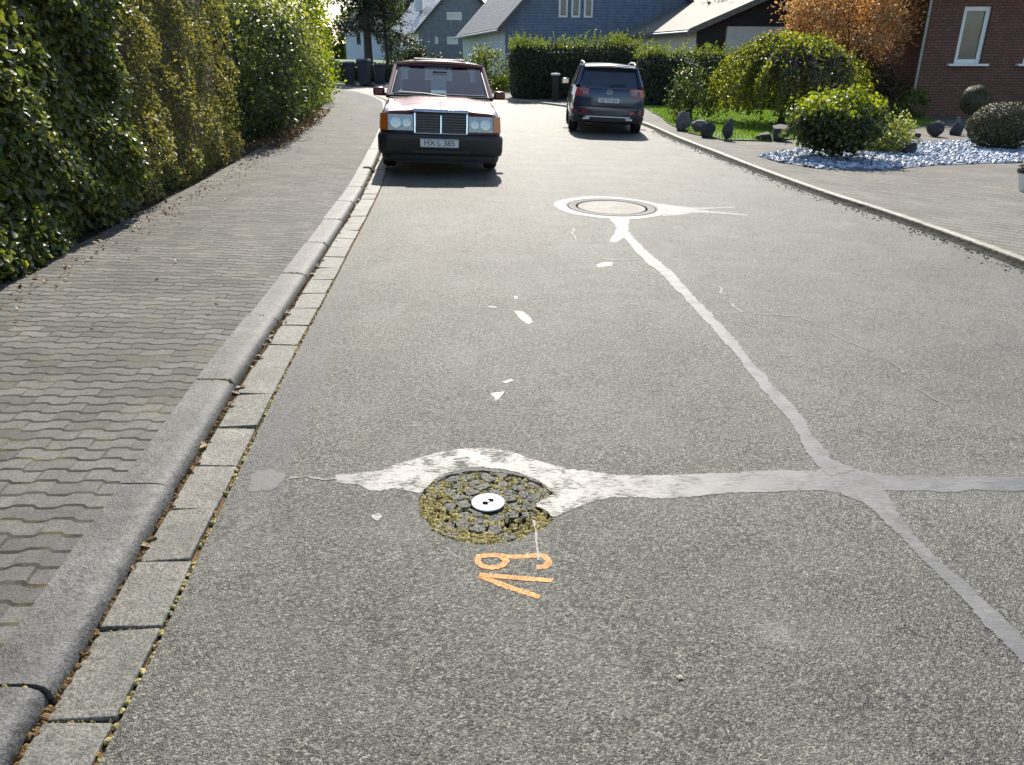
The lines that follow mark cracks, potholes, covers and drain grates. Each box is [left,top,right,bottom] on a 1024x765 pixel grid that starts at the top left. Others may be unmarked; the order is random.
crack [717,286,948,406]
manhole cover [568,199,656,216]
